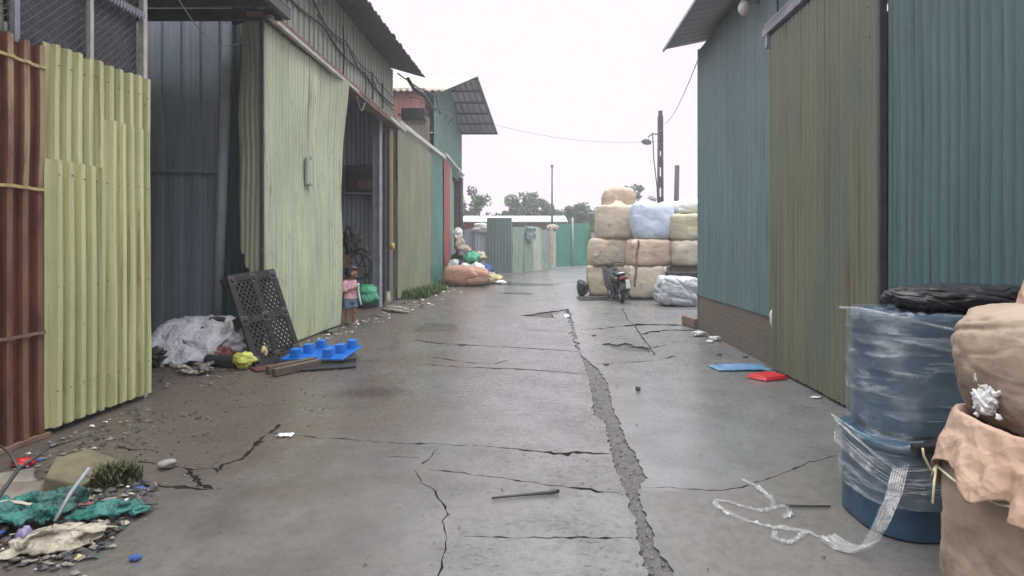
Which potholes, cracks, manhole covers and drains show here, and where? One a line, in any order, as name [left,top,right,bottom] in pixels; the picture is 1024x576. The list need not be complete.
crack [609,308,695,364]
crack [654,455,837,491]
crack [117,424,629,576]
crack [411,330,579,374]
pothole [521,308,570,318]
